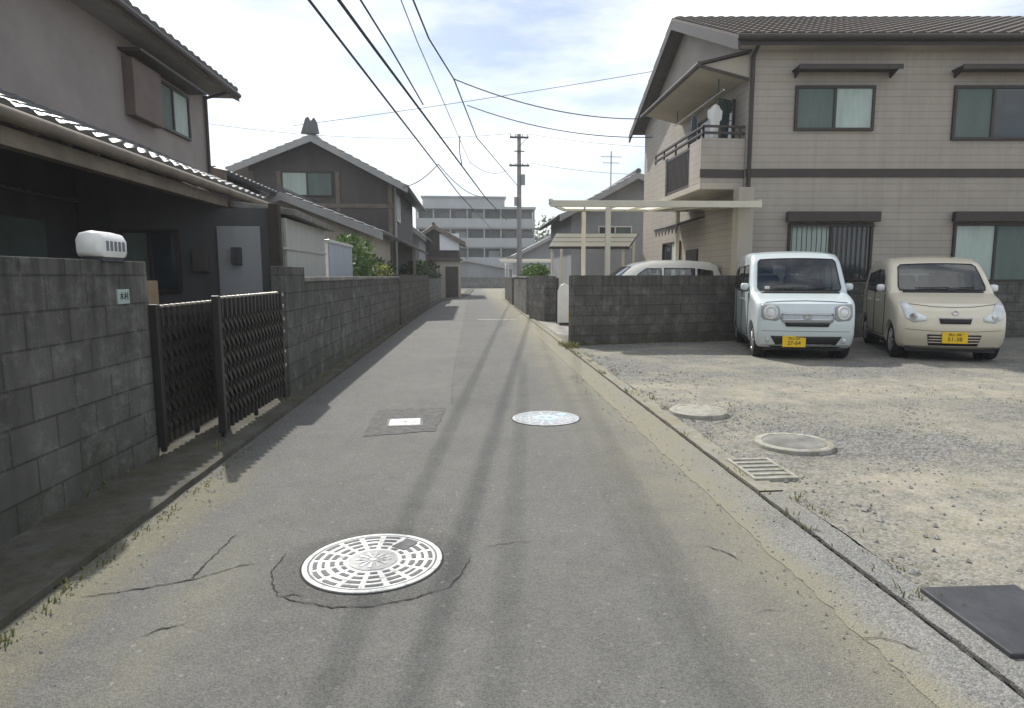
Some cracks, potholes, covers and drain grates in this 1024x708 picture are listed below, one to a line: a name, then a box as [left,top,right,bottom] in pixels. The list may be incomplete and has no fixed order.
crack [83,535,248,597]
manhole cover [669,404,728,420]
manhole cover [512,411,580,426]
crack [270,552,471,608]
drain grate [727,457,800,481]
manhole cover [300,534,444,595]
manhole cover [754,433,835,456]
utility cover [386,418,423,427]
